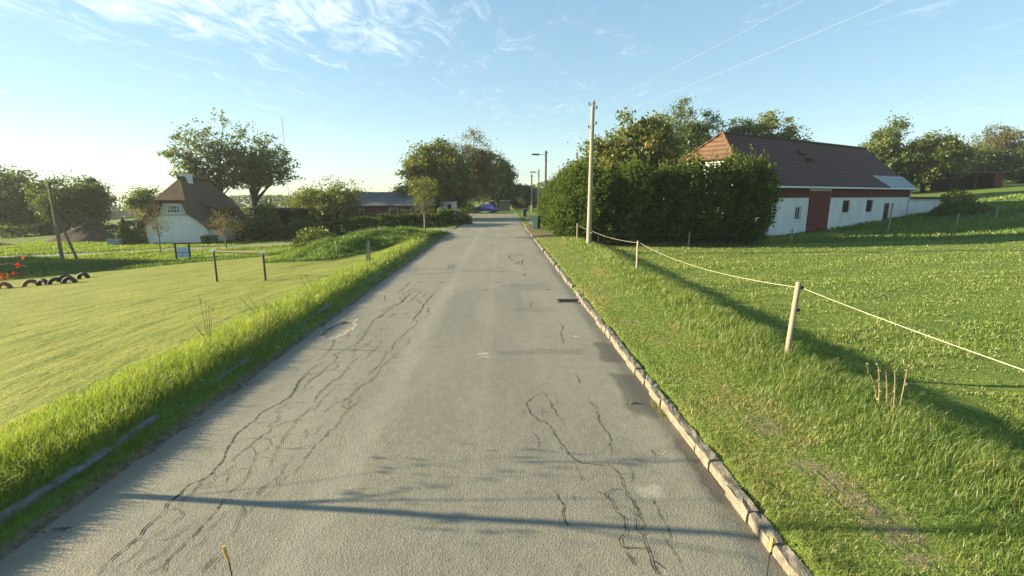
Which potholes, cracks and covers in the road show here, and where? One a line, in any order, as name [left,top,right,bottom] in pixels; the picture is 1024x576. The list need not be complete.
crack [523,390,683,575]
crack [96,284,430,574]
crack [413,254,526,290]
